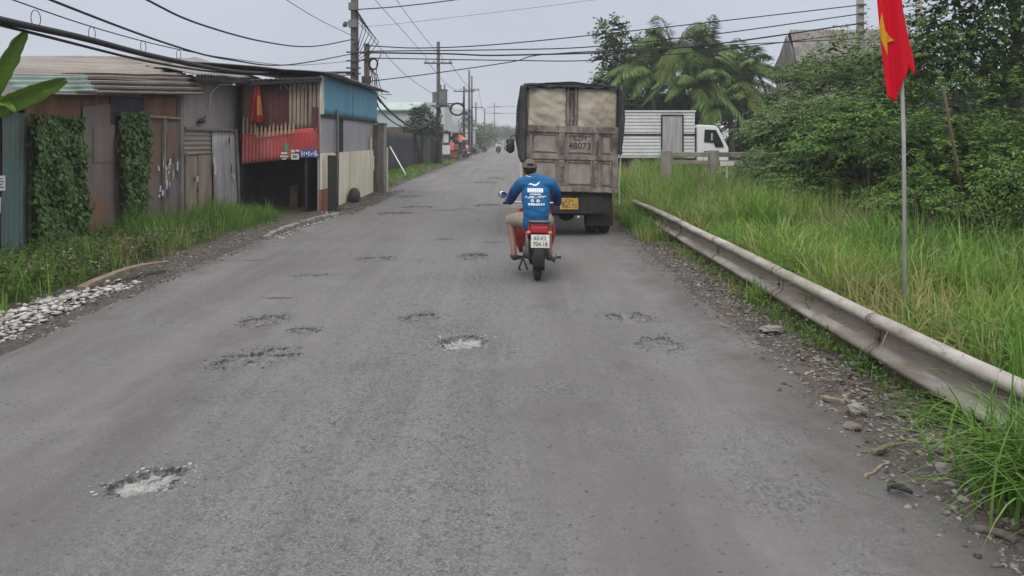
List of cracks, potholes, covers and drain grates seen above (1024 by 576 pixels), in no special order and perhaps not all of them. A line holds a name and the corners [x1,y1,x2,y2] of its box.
pothole [197,343,310,370]
pothole [89,462,219,502]
pothole [281,326,324,335]
pothole [455,252,489,261]
pothole [625,311,654,324]
pothole [634,333,688,354]
pothole [235,314,293,328]
pothole [399,311,442,324]
pothole [426,332,499,351]
